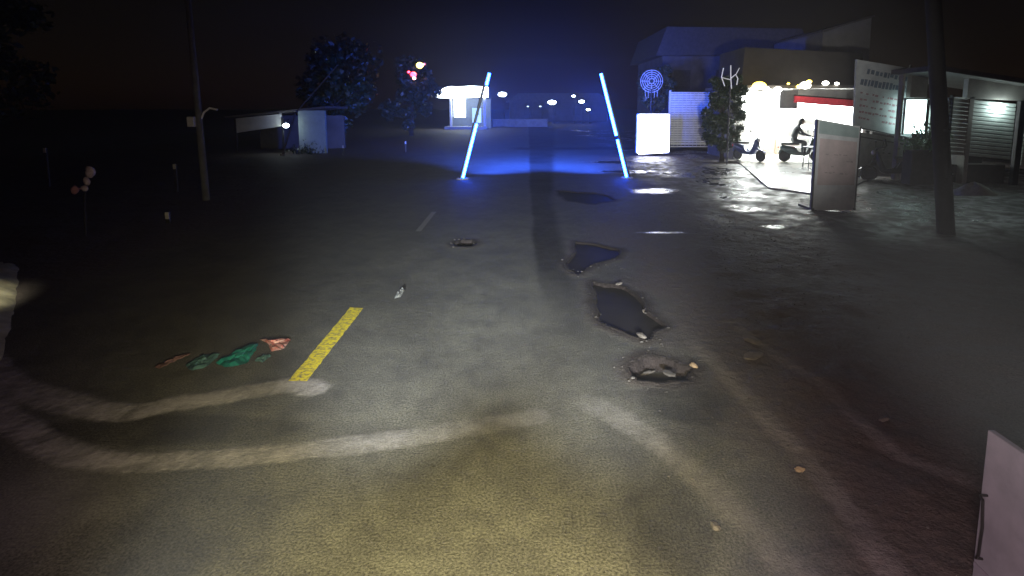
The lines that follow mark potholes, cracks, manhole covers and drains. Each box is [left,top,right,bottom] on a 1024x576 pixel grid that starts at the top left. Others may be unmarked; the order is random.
pothole [450,239,480,248]
pothole [590,280,671,342]
pothole [556,190,616,205]
pothole [622,354,700,386]
pothole [564,241,623,275]
